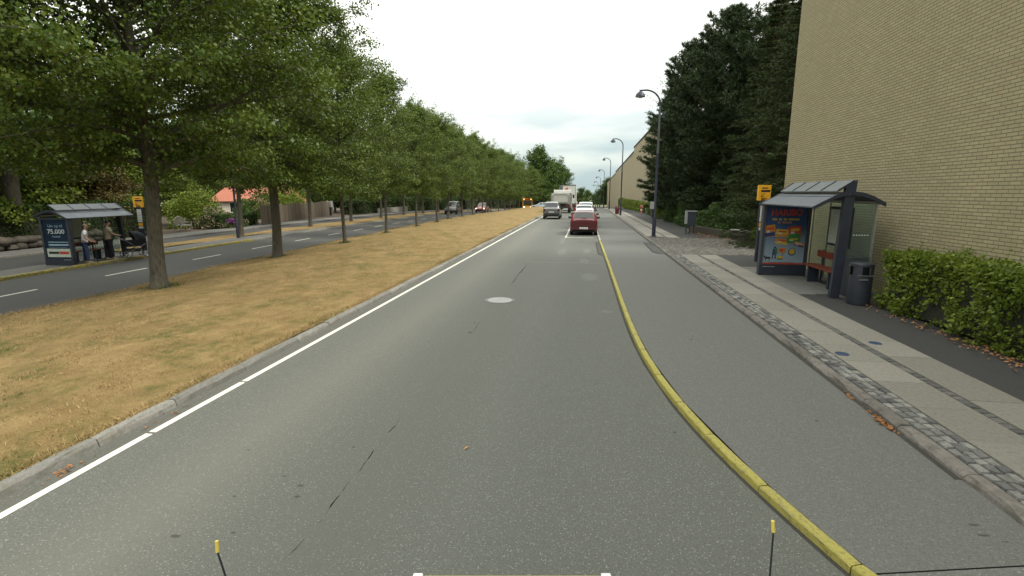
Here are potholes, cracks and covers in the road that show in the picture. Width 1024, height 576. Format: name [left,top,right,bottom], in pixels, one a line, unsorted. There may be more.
crack [288,422,398,556]
